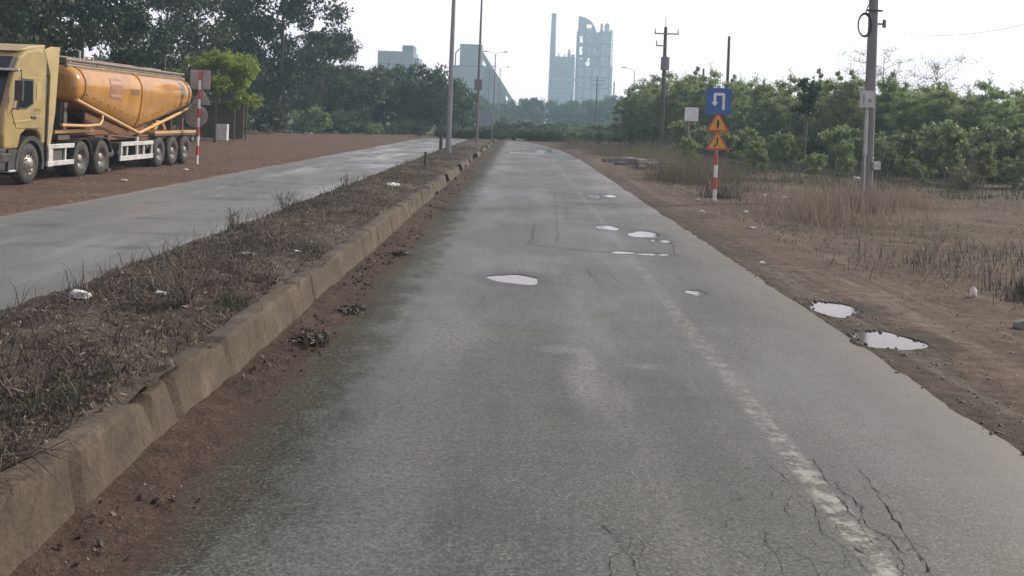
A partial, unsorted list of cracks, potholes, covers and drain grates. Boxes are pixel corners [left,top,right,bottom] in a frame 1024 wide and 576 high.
pothole [486,274,538,285]
crack [597,523,646,576]
pothole [847,328,930,351]
pothole [804,298,867,319]
crack [718,458,933,576]
